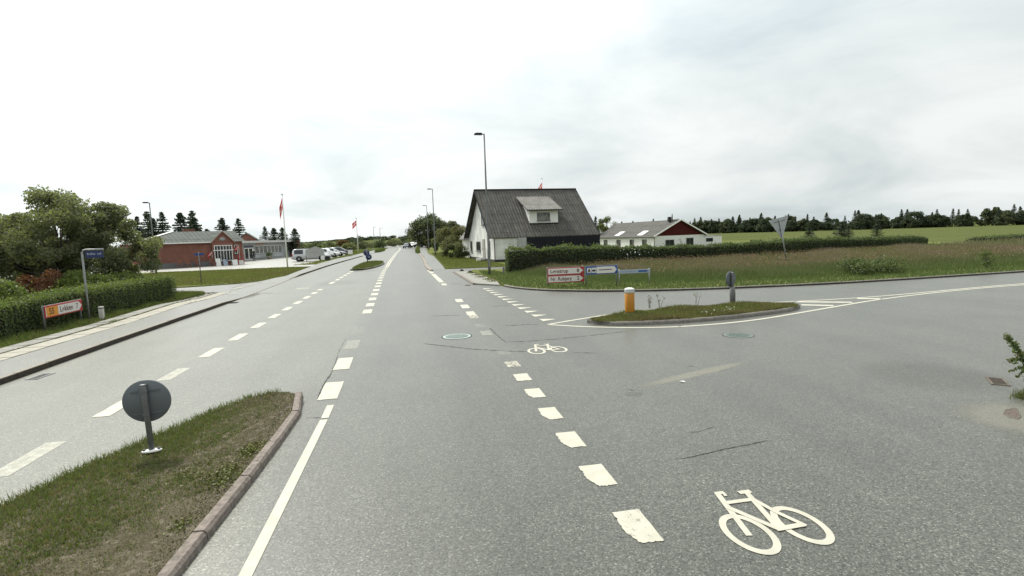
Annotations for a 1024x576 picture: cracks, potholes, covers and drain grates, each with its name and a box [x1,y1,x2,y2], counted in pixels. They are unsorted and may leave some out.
drain grate [985,377,1011,386]
